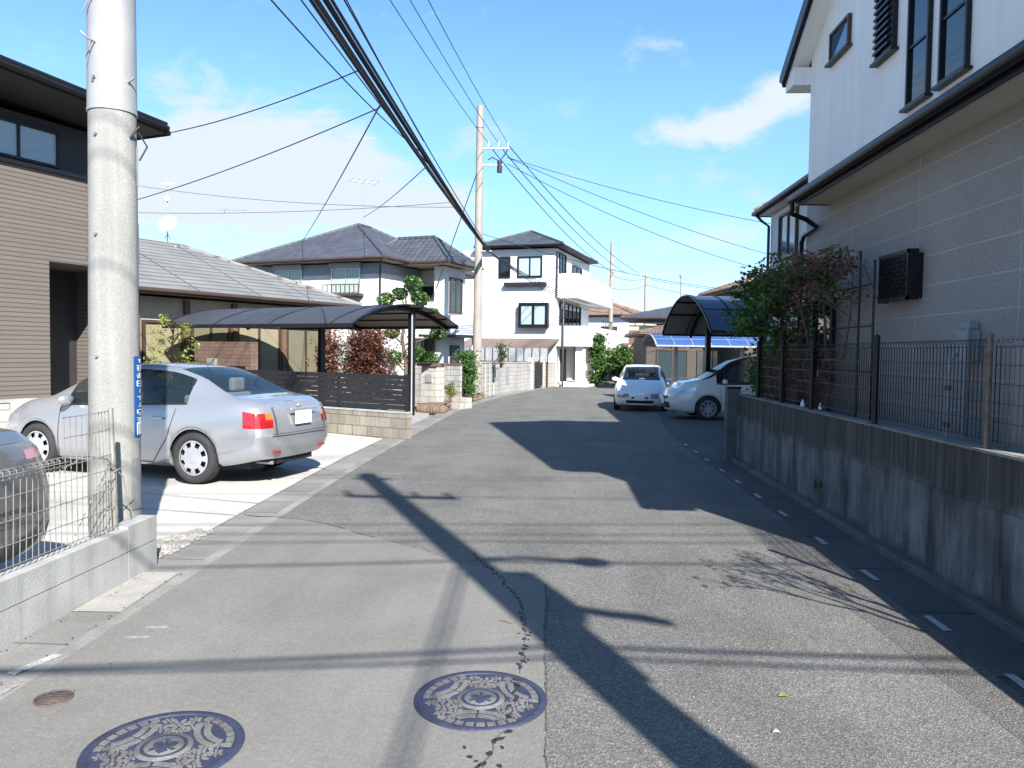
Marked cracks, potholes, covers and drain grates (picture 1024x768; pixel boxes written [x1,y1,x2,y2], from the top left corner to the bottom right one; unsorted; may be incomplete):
manhole cover [76,711,245,768]
crack [463,553,548,768]
manhole cover [33,690,74,707]
manhole cover [413,671,547,732]
